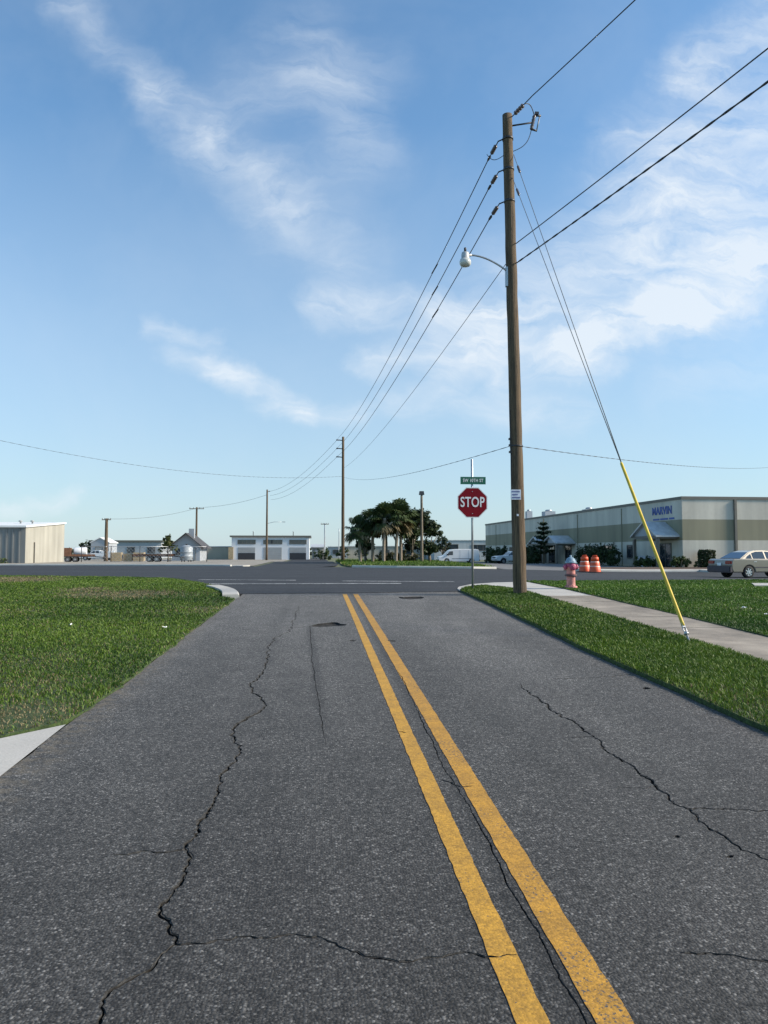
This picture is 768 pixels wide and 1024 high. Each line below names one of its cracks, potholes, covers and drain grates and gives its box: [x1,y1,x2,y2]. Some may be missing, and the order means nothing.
crack [96,607,506,1024]
crack [519,684,768,861]
crack [678,951,768,963]
